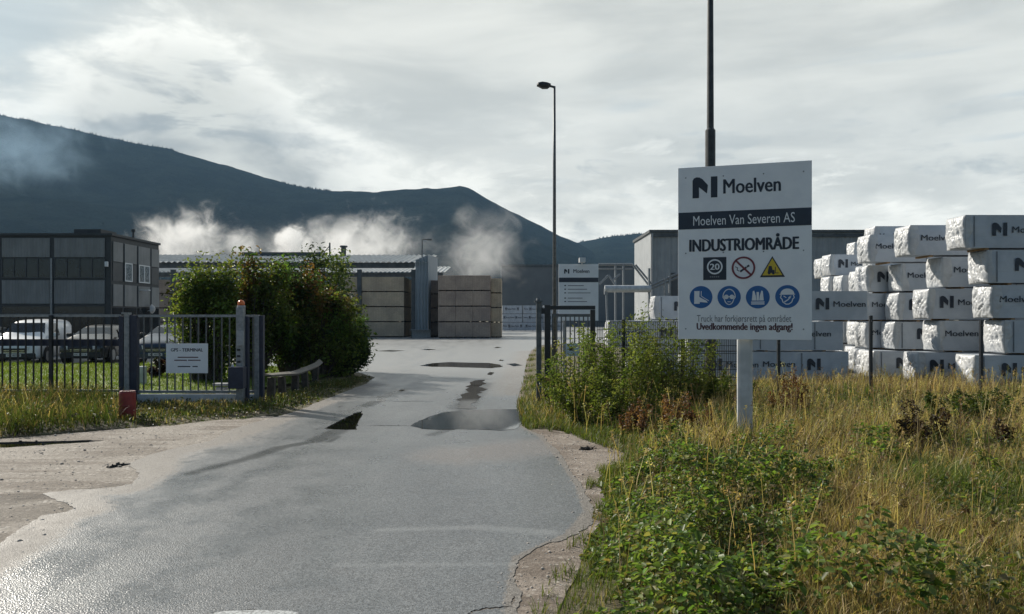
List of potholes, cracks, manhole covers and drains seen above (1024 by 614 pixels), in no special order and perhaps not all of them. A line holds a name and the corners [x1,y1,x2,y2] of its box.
pothole [324,411,363,430]
